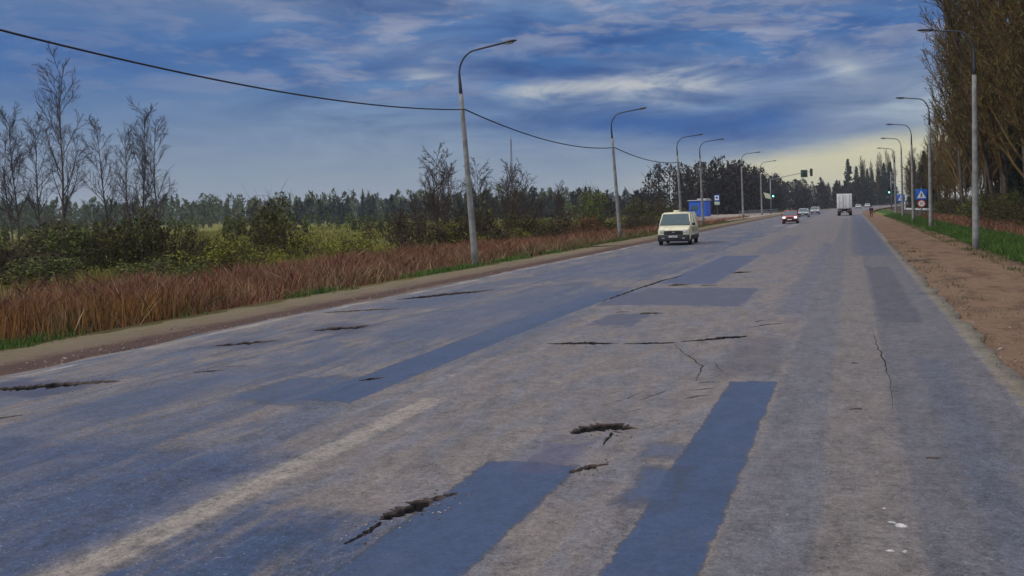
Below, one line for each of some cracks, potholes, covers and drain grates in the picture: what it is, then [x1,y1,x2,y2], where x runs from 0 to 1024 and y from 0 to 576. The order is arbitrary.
pothole [379,492,458,520]
crack [872,330,893,410]
crack [601,275,682,302]
crack [546,319,781,399]
pothole [569,463,608,473]
pothole [570,422,638,434]
